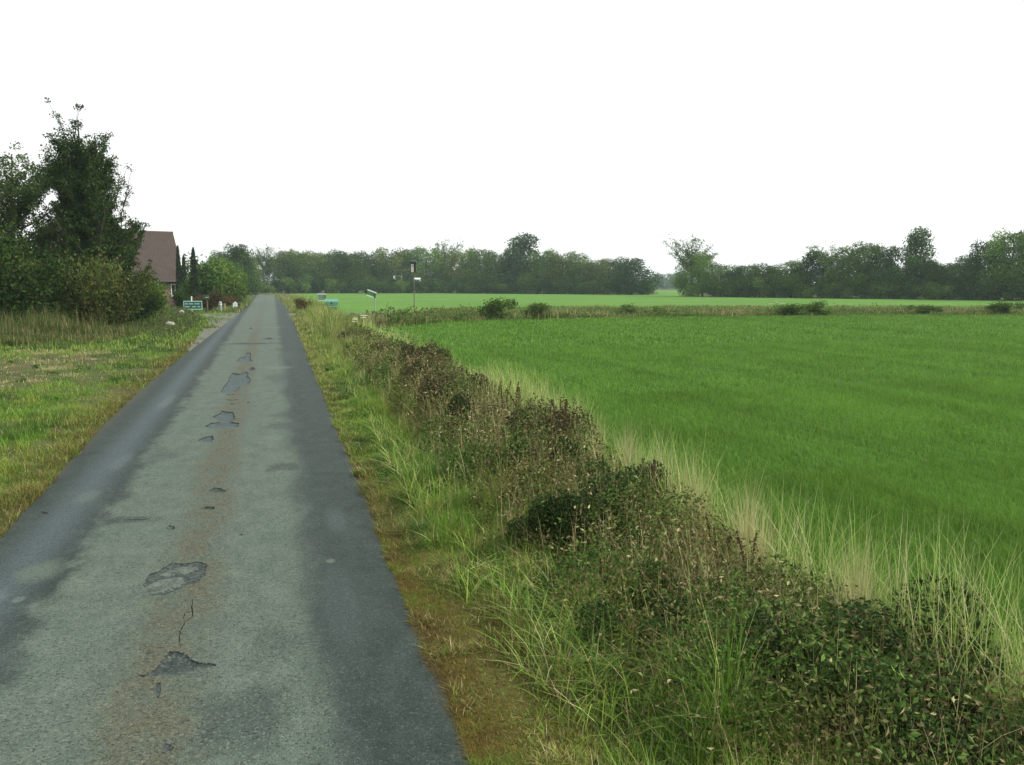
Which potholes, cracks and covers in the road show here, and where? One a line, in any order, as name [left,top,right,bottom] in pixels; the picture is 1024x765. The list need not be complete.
crack [179,599,193,642]
pothole [143,562,207,595]
pothole [135,651,216,678]
pothole [205,411,239,428]
pothole [221,372,251,392]
